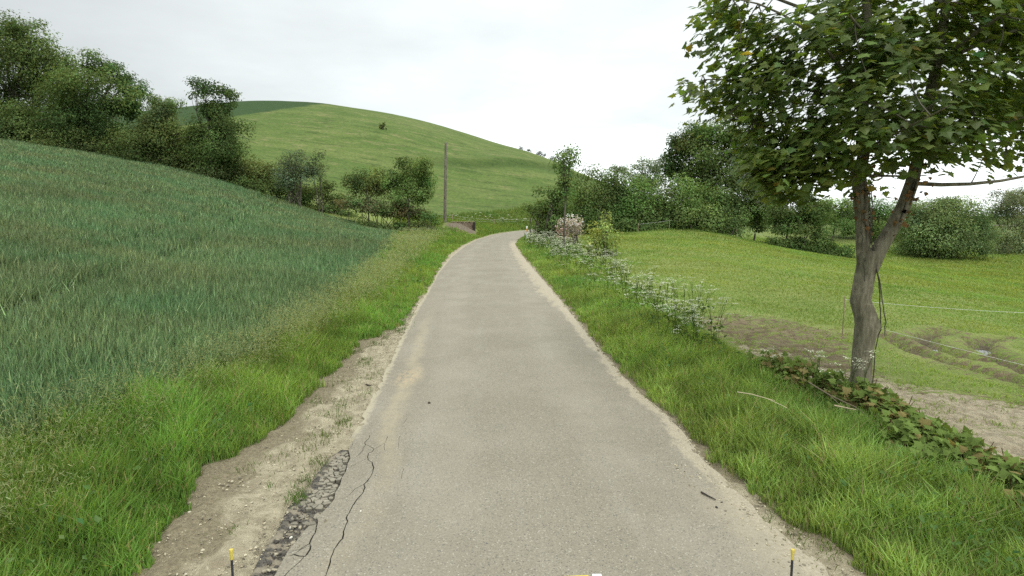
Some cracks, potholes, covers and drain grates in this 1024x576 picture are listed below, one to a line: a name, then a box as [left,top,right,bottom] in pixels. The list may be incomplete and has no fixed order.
pothole [252,450,349,576]
crack [284,435,399,576]
